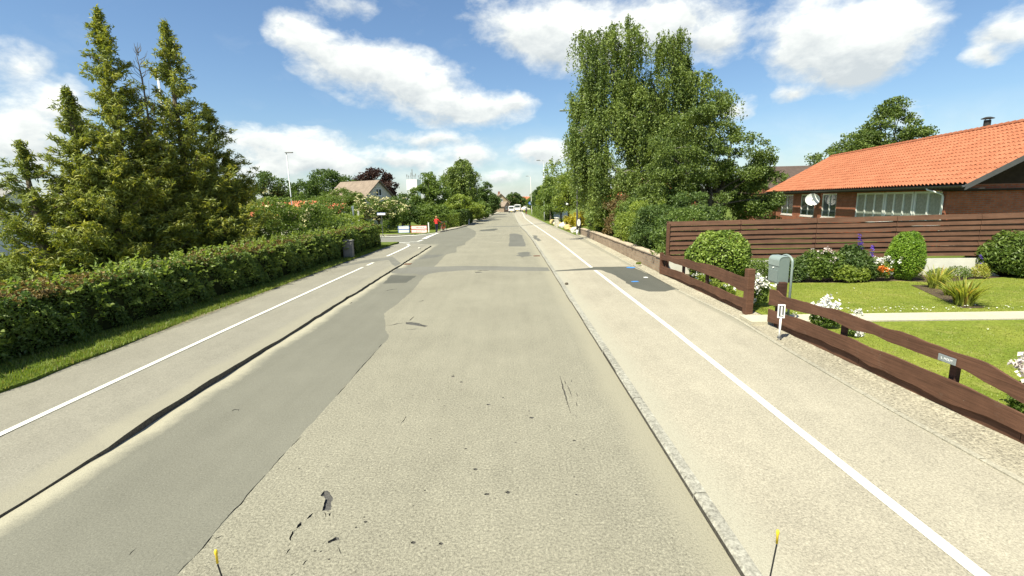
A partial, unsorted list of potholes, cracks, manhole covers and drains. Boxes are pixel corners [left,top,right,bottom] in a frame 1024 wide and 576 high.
crack [286,512,341,575]
pothole [321,491,333,511]
